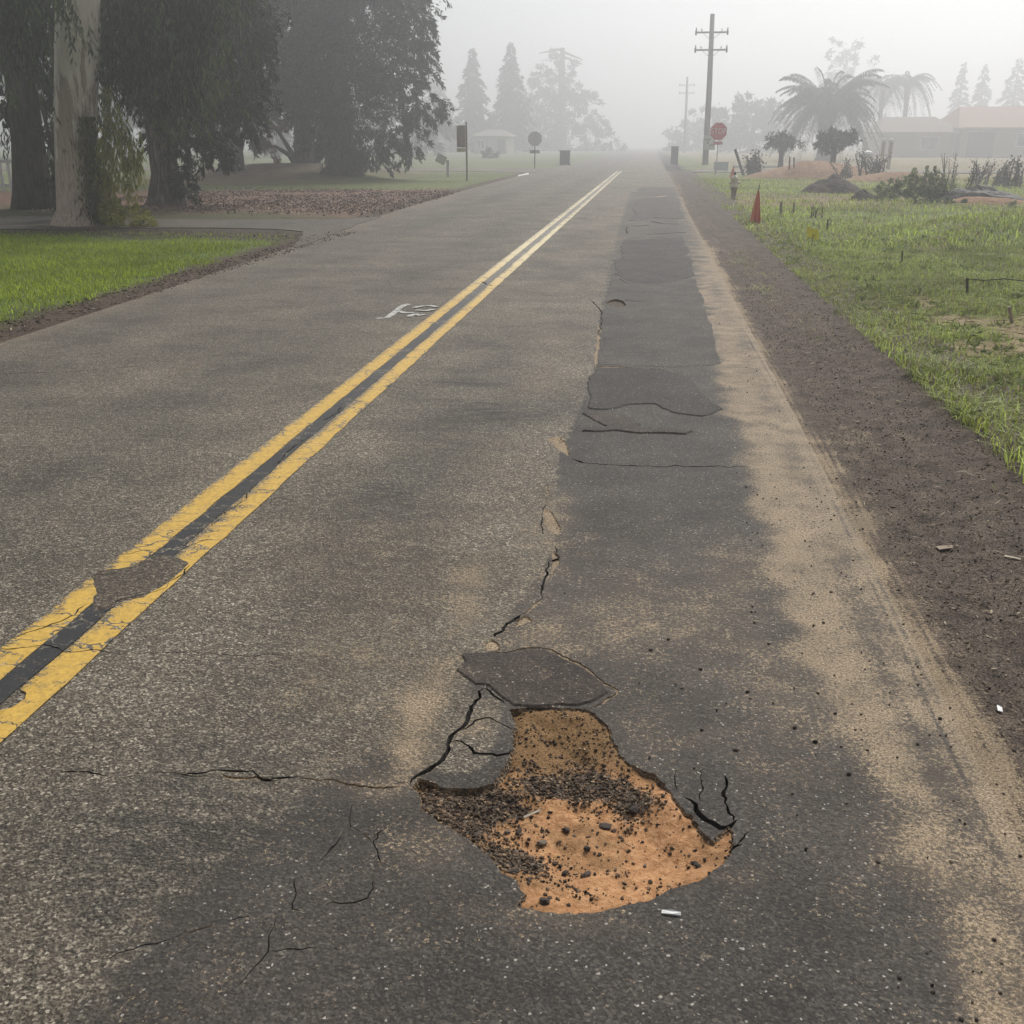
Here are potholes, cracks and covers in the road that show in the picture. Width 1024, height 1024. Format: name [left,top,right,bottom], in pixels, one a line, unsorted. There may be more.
pothole [412,707,735,914]
crack [674,768,748,853]
crack [63,484,619,904]
crack [101,880,312,986]
